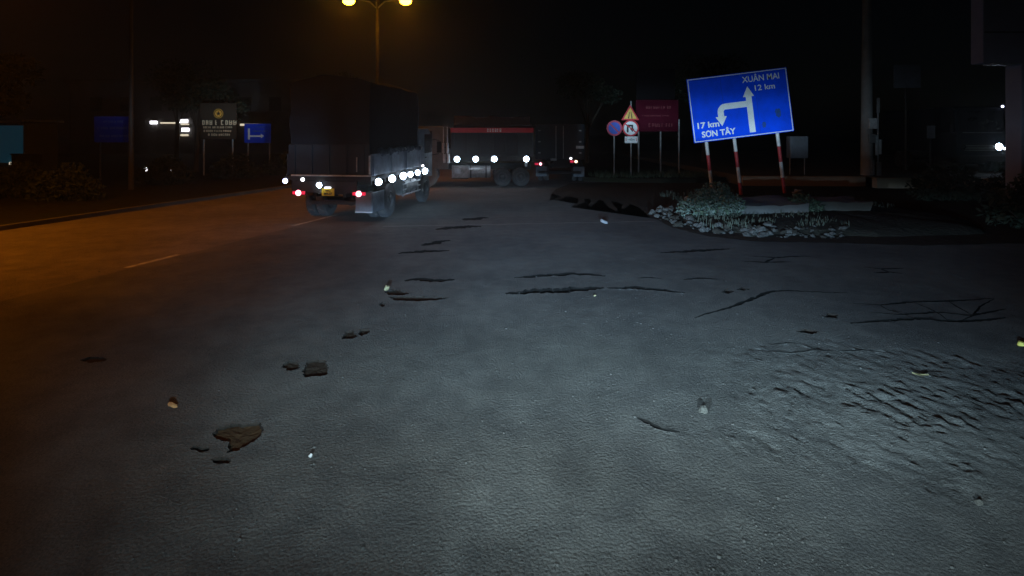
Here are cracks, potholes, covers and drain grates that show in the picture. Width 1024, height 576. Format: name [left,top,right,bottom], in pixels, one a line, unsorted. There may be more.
crack [637,417,680,433]
pothole [301,359,329,377]
crack [754,342,888,353]
pothole [282,361,300,371]
crack [398,217,488,254]
pothole [212,422,264,453]
crack [505,272,1005,324]
